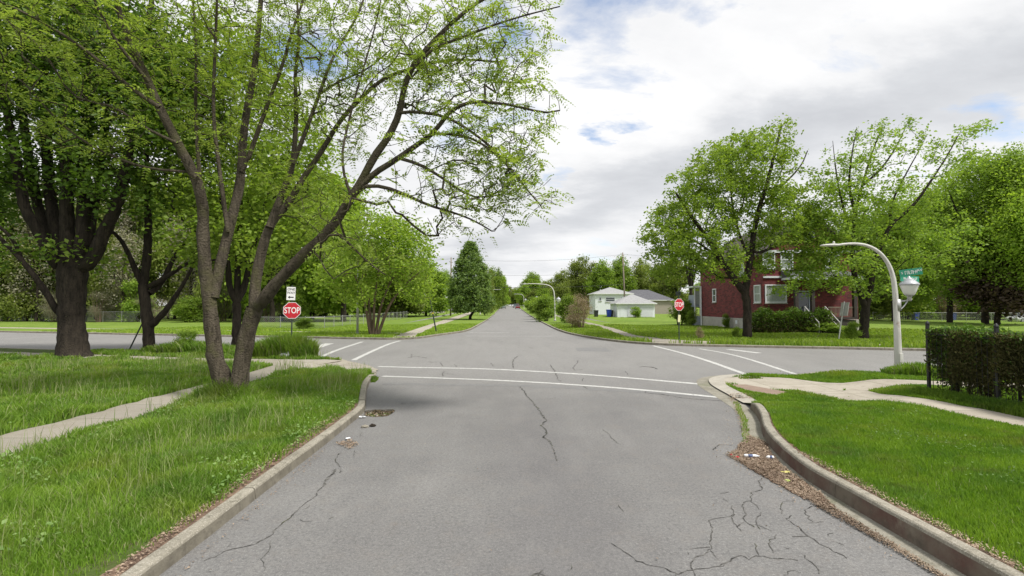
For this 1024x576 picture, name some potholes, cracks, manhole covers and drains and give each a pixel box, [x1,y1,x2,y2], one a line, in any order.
crack [611,478,847,576]
pothole [364,409,395,417]
crack [204,434,361,570]
crack [520,386,557,461]
